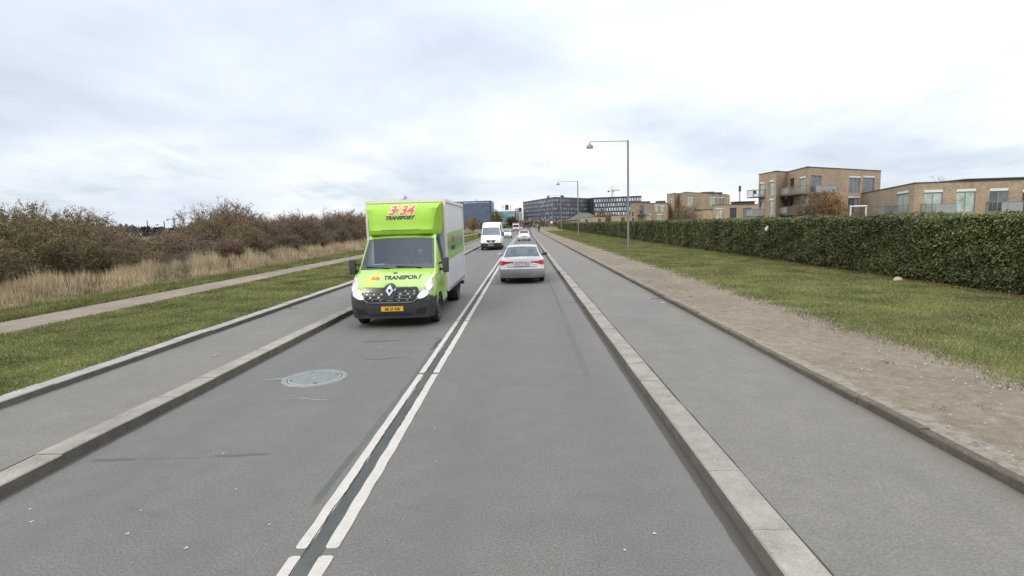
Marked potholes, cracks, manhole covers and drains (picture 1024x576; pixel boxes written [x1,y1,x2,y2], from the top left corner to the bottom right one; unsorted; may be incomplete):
manhole cover [262,369,347,387]
